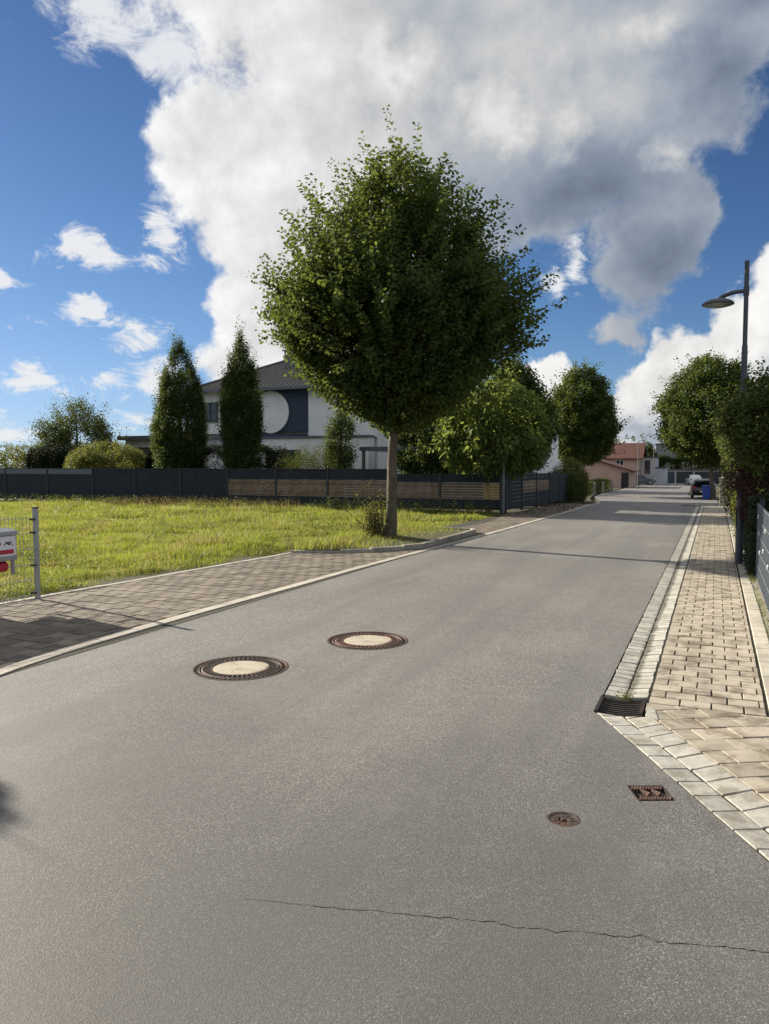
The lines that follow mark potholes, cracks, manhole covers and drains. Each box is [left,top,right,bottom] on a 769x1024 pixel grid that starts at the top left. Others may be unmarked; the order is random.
manhole cover [327,631,408,650]
drain grate [593,696,647,718]
utility cover [546,812,581,827]
manhole cover [191,656,289,681]
crack [249,899,769,953]
